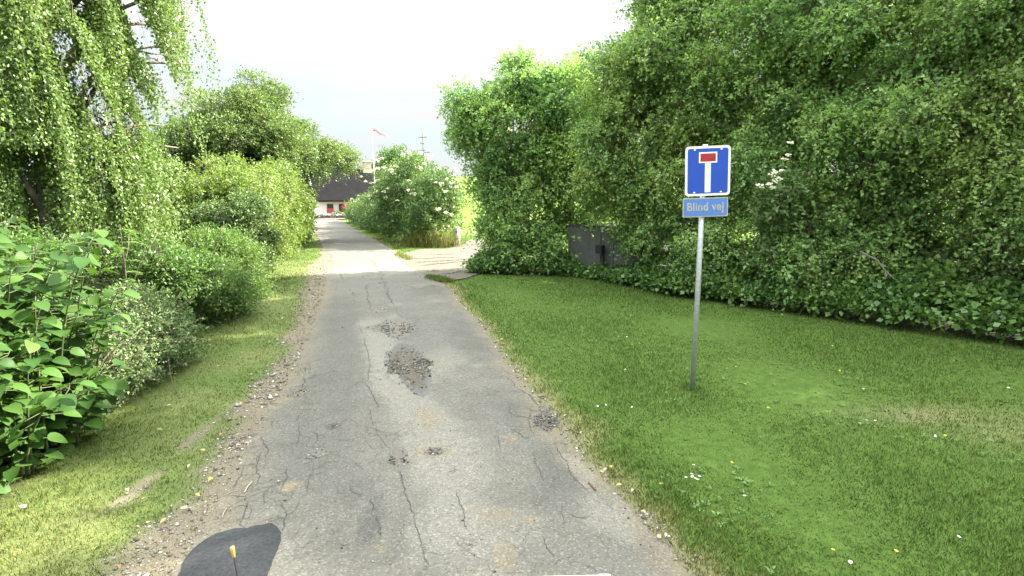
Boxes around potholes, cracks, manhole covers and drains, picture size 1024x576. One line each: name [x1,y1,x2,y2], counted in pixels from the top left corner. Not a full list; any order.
pothole [387,445,409,472]
crack [496,377,585,488]
pothole [374,317,419,339]
pothole [533,405,559,432]
crack [359,326,391,449]
crack [232,397,320,531]
crack [400,471,429,564]
pothole [384,341,435,397]
pothole [424,447,444,455]
